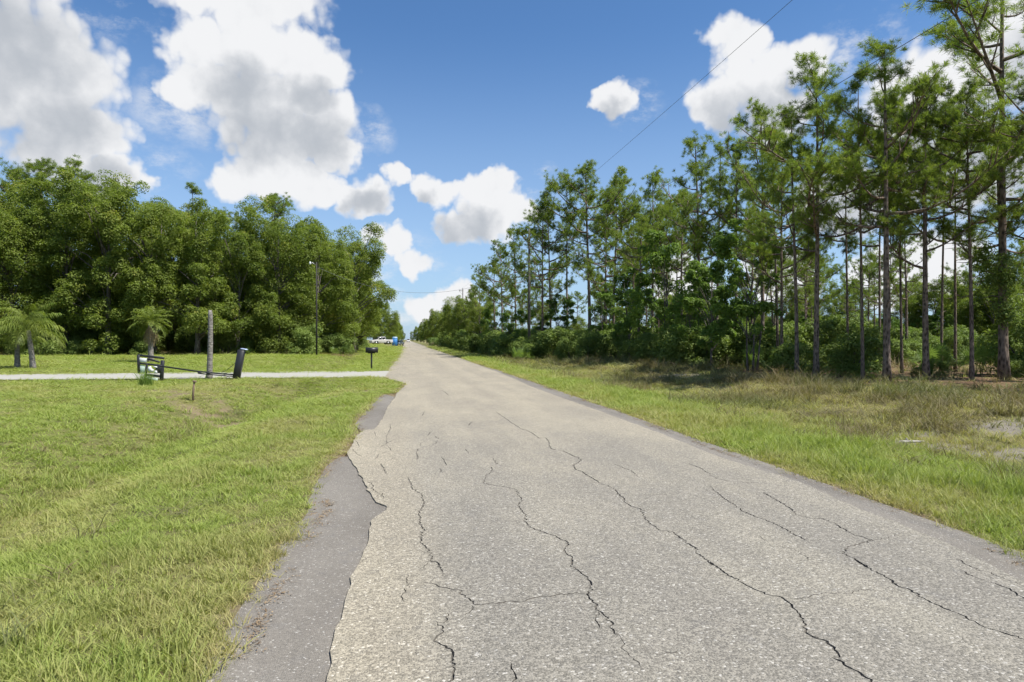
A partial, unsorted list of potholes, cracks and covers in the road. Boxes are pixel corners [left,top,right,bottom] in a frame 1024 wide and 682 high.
crack [501,415,1022,682]
crack [401,459,641,682]
crack [353,426,396,563]
